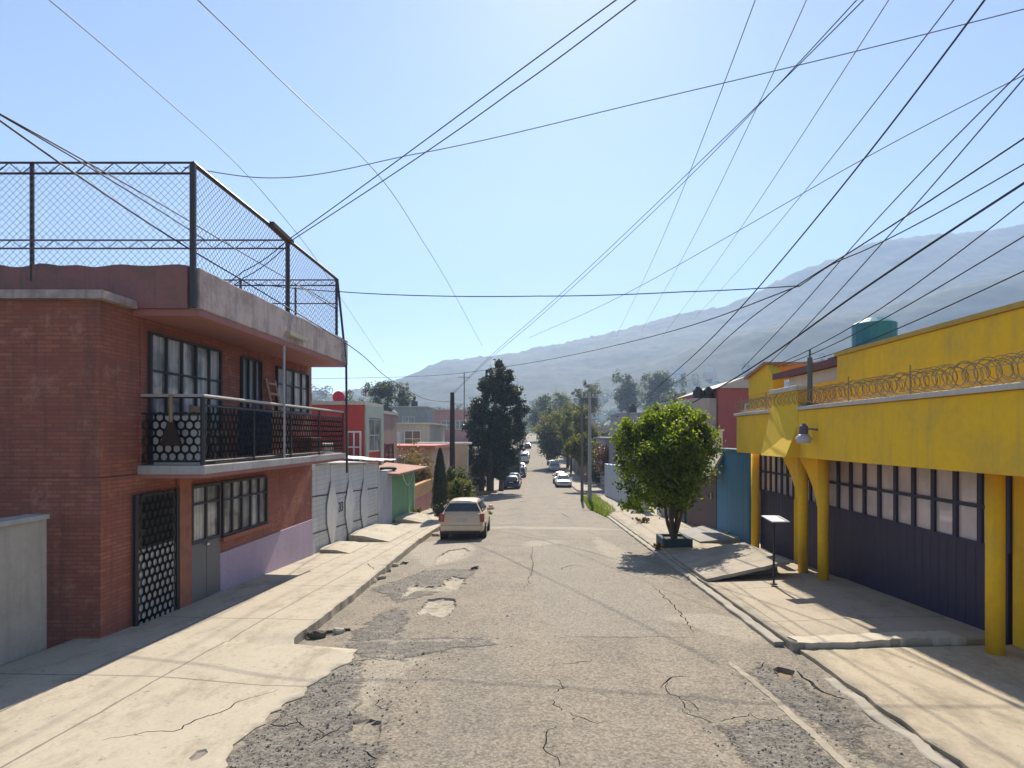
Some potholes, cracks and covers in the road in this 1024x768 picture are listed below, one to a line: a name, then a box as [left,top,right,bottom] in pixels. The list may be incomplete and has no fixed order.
pothole [399,576,467,597]
crack [543,661,601,767]
pothole [189,749,208,761]
pothole [416,598,457,618]
crack [104,691,275,740]
pothole [773,667,795,680]
pothole [433,548,470,566]
crack [661,676,779,723]
